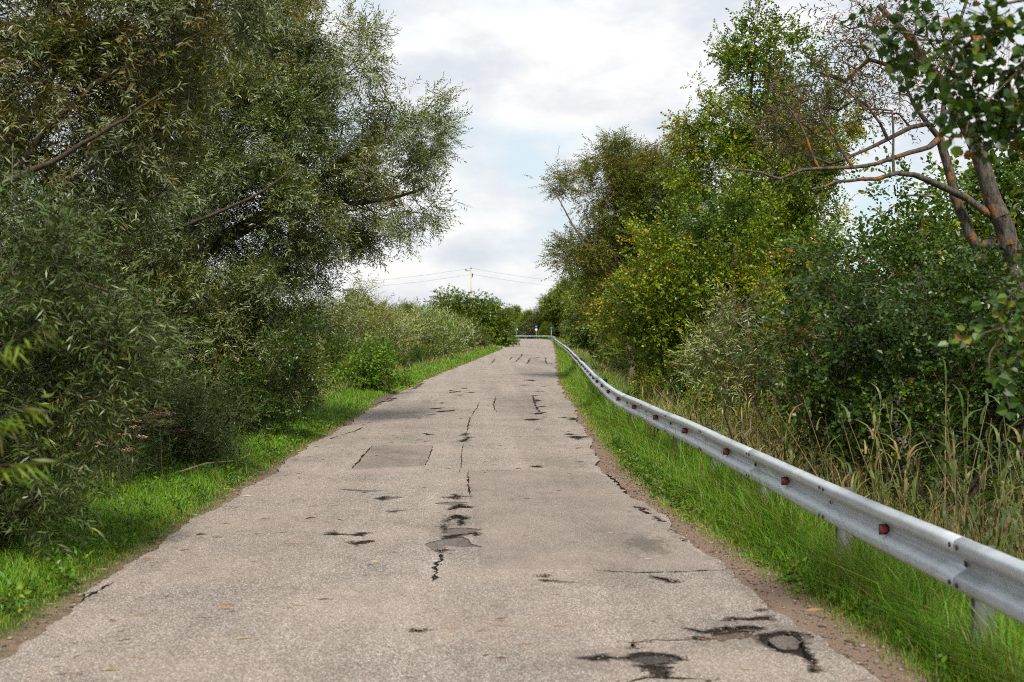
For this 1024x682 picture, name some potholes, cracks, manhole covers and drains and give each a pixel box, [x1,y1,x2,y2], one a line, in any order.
crack [330,427,372,470]
crack [605,474,685,541]
crack [489,356,553,365]
crack [80,583,112,603]
crack [629,639,693,649]
crack [431,552,444,582]
crack [530,395,548,415]
